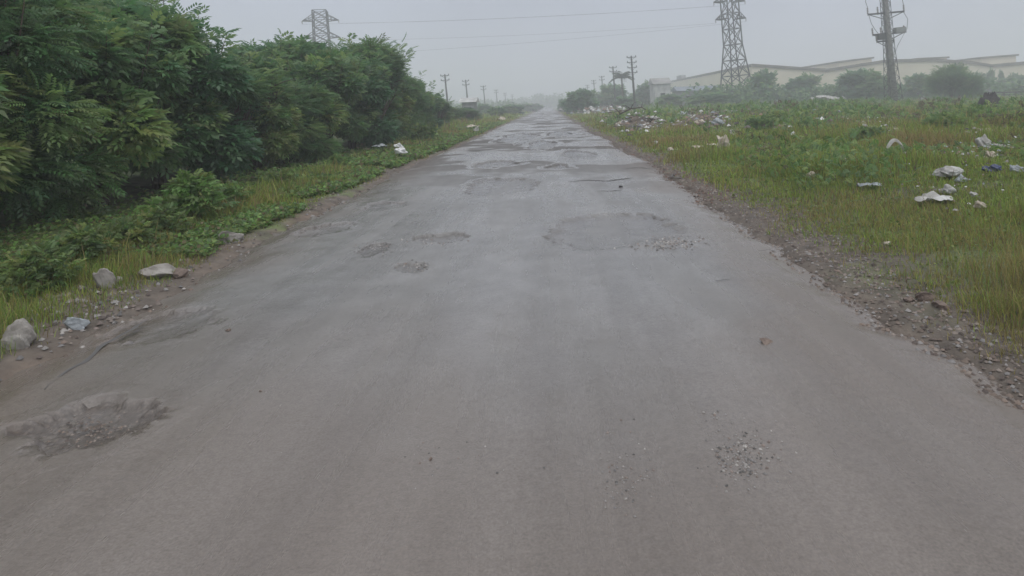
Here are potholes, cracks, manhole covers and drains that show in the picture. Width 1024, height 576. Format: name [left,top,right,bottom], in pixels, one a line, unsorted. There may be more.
pothole [343,239,402,260]
pothole [464,159,530,169]
pothole [453,176,552,198]
pothole [521,139,563,151]
pothole [0,383,202,477]
pothole [537,162,579,170]
pothole [398,230,484,246]
pothole [488,132,546,145]
pothole [522,211,703,256]
crack [44,321,145,390]
pothole [542,130,581,138]
